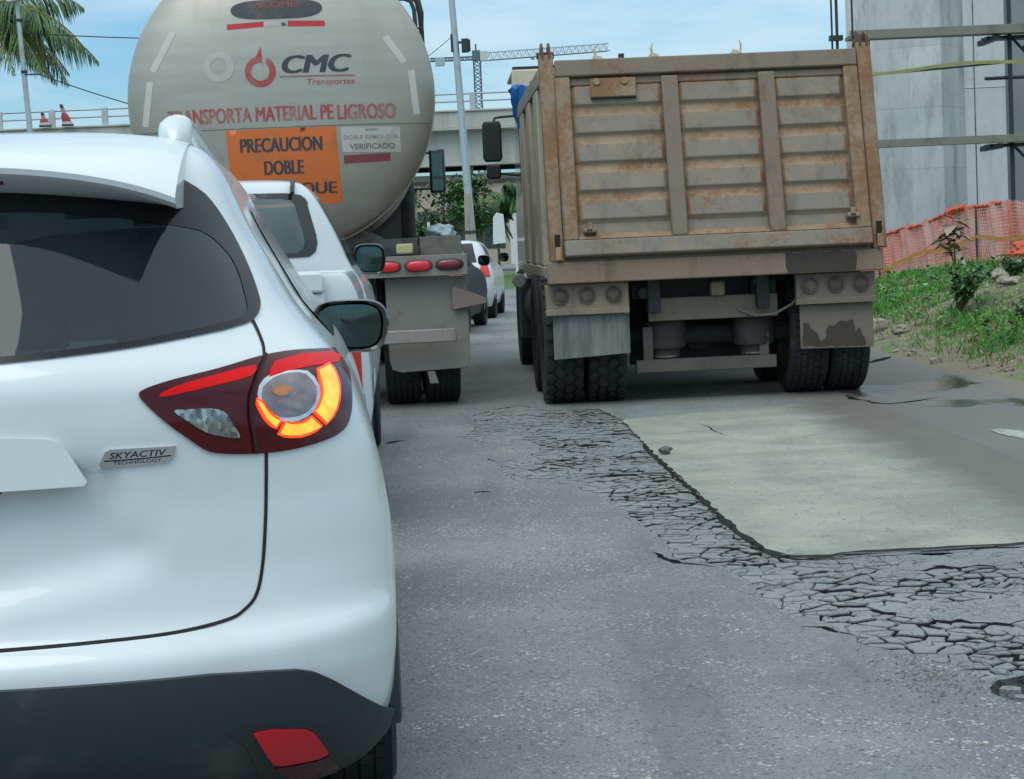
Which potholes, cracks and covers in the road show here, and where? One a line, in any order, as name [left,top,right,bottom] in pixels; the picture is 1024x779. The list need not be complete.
pothole [989,675,1024,702]
crack [465,395,1024,681]
